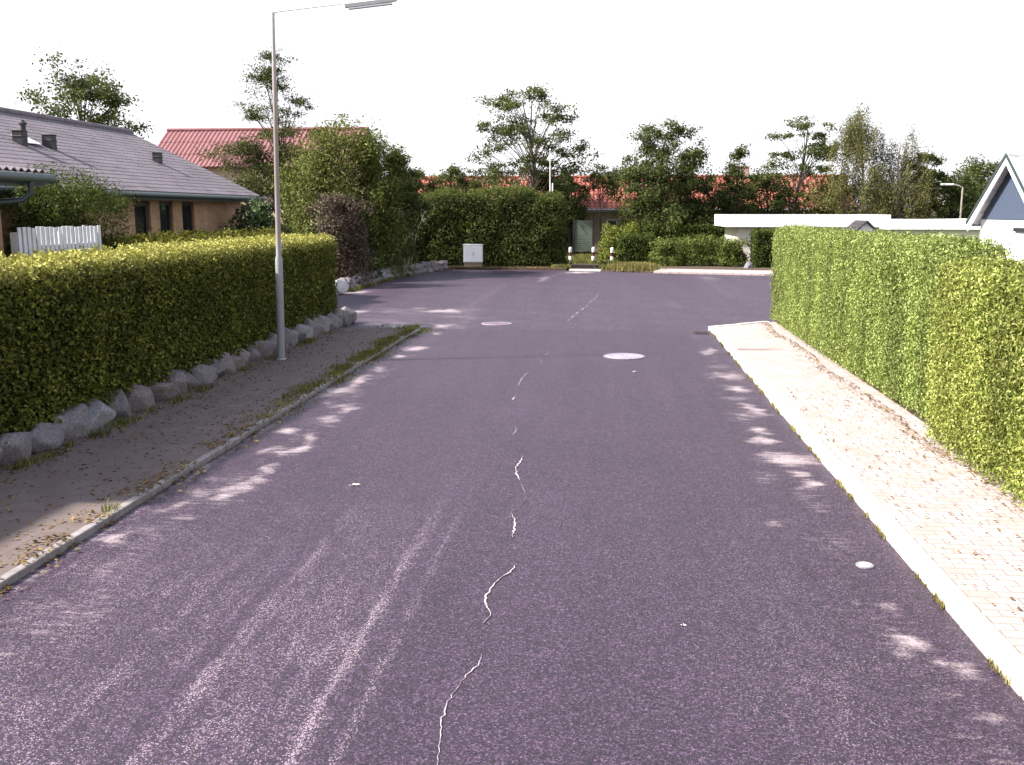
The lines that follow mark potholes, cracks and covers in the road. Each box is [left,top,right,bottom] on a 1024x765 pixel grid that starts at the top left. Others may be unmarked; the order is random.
utility cover [855,561,874,569]
crack [437,654,482,765]
crack [484,564,516,623]
crack [509,456,526,540]
